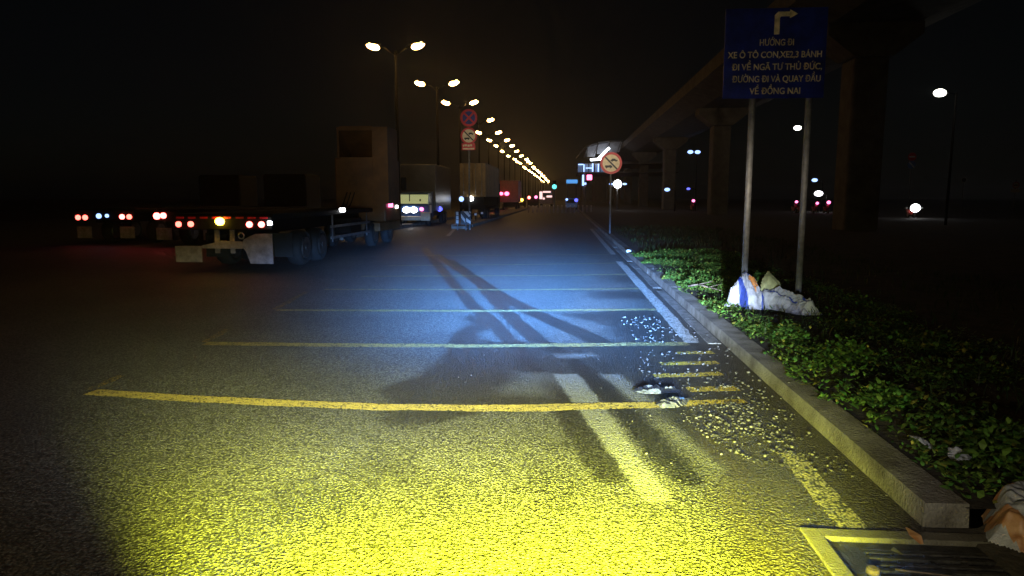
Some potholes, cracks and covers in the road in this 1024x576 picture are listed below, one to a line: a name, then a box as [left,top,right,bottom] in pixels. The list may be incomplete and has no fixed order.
drain grate [800,527,1012,576]
